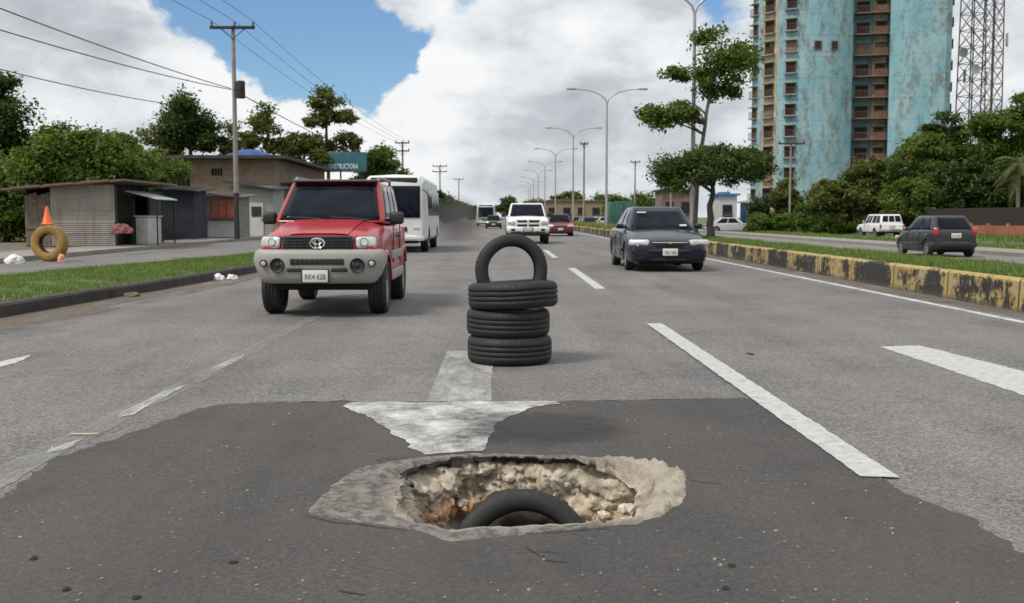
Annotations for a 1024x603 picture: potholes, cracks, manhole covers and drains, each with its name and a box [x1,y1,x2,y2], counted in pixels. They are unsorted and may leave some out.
crack [526,528,605,562]
pothole [308,453,687,542]
